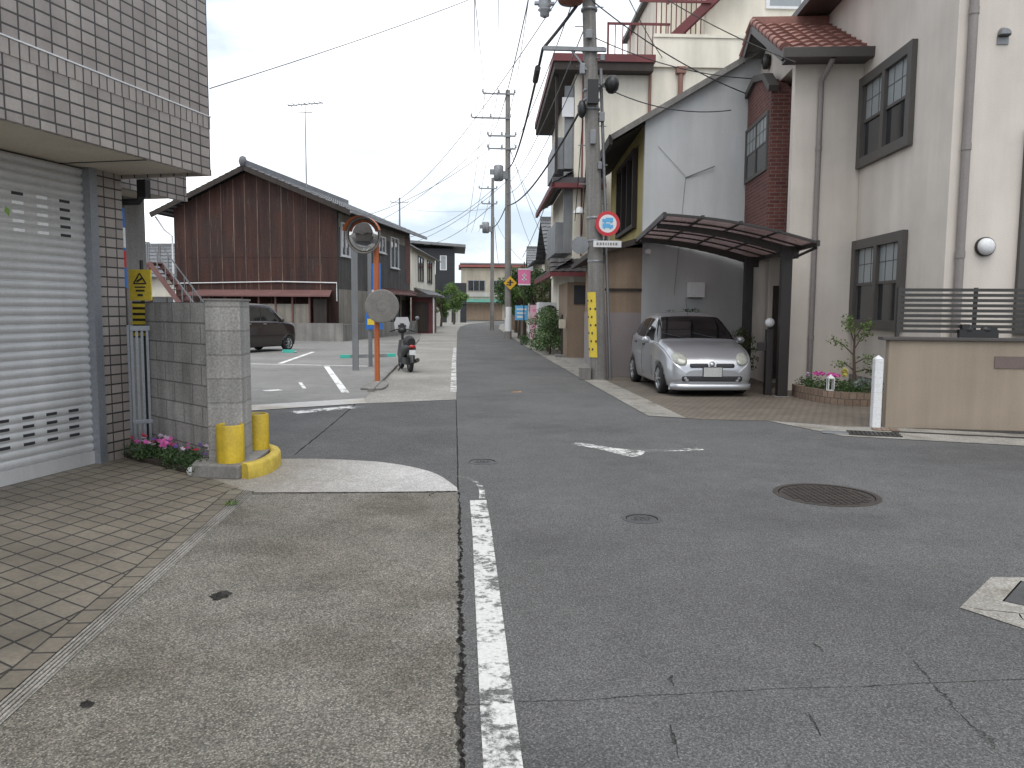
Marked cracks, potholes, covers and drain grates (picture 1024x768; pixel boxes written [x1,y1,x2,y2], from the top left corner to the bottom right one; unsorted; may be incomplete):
crack [461,660,1024,749]
manhole cover [773,483,882,507]
manhole cover [622,513,662,524]
crack [669,725,679,759]
